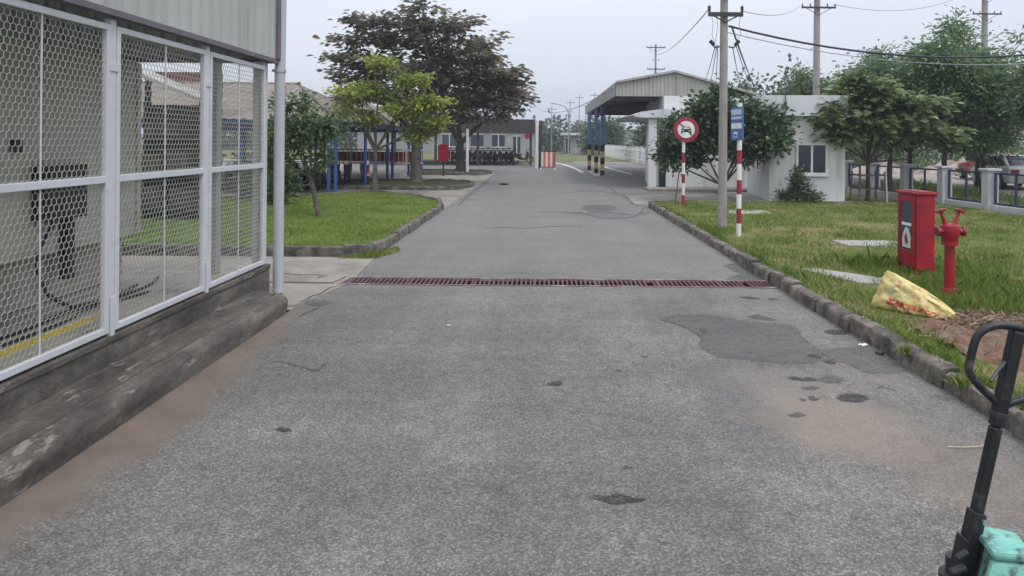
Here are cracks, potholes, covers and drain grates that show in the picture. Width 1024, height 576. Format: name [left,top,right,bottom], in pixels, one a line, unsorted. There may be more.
pothole [592,493,645,504]
crack [272,361,328,371]
drain grate [337,277,777,288]
pothole [838,393,867,402]
